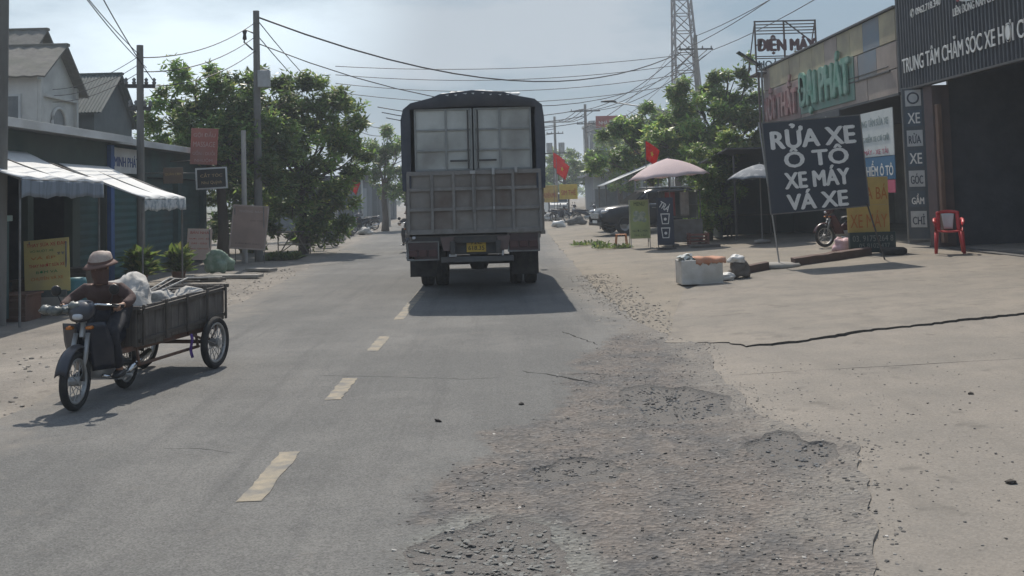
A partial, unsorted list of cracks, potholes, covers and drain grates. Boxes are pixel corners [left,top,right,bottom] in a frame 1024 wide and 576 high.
pothole [618,384,735,424]
crack [665,312,1024,375]
crack [524,371,600,384]
pothole [744,430,840,469]
pothole [402,514,576,576]
